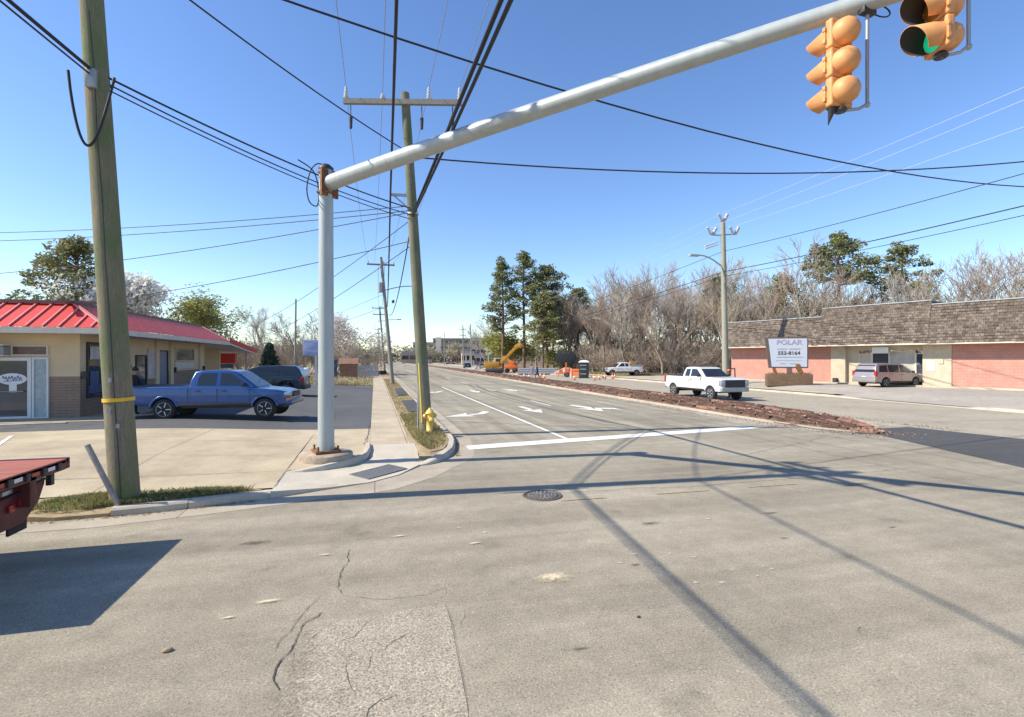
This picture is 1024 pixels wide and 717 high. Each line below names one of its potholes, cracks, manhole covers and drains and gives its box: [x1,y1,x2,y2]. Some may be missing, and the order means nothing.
crack [272,603,320,691]
manhole cover [522,490,563,501]
